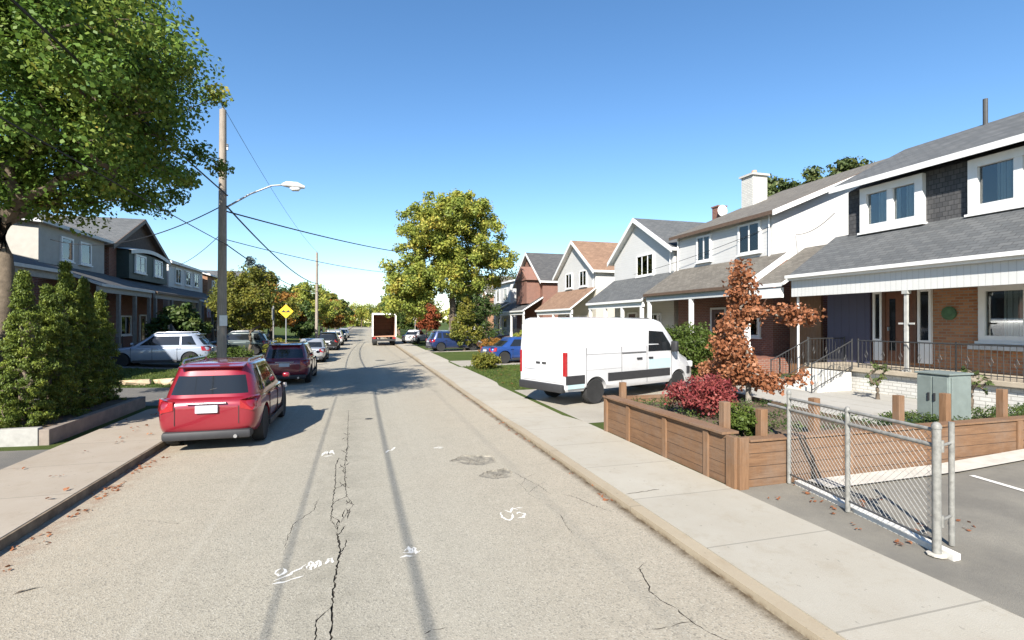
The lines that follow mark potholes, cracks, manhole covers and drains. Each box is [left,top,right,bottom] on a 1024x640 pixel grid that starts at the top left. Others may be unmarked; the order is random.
crack [639,564,726,640]
pothole [450,455,496,465]
pothole [479,468,513,479]
